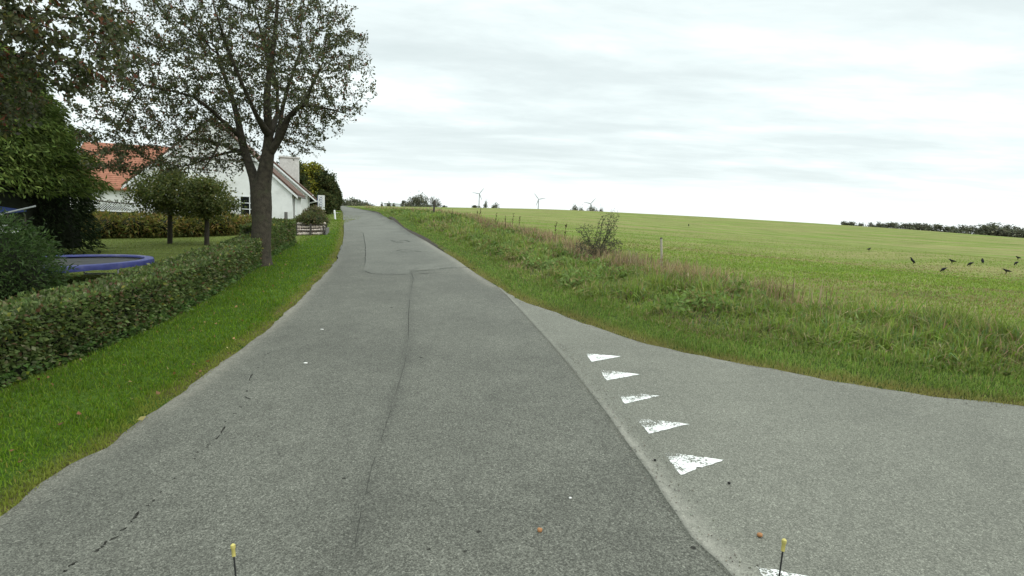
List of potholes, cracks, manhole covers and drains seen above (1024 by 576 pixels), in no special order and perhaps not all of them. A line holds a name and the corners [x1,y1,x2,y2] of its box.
crack [63,352,271,572]
crack [355,282,422,548]
